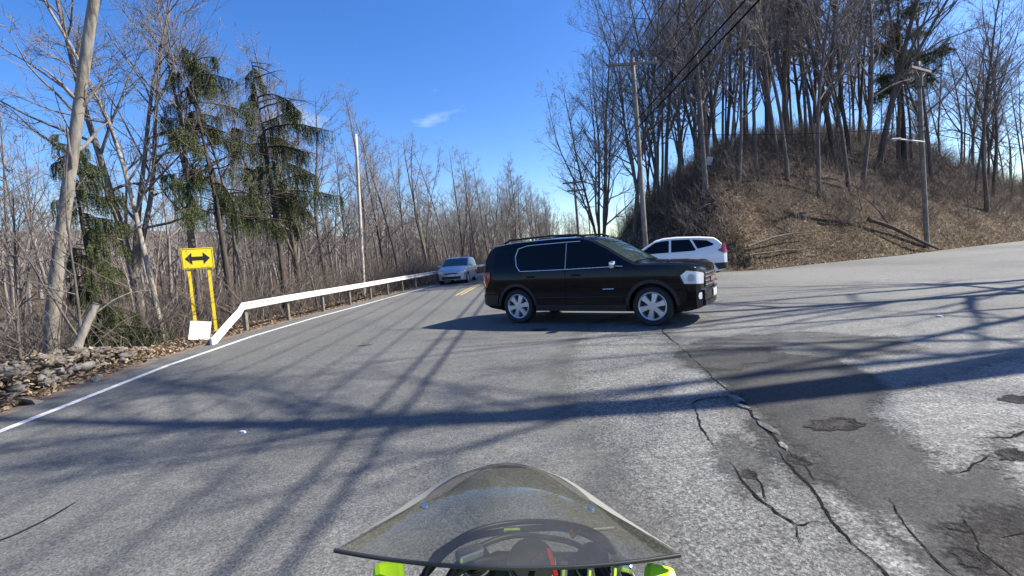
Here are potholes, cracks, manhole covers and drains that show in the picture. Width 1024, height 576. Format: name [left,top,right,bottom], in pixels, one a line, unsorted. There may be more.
crack [986,430,1024,438]
pothole [803,417,867,431]
crack [690,396,1013,576]
pothole [997,394,1024,404]
pothole [995,448,1024,461]
